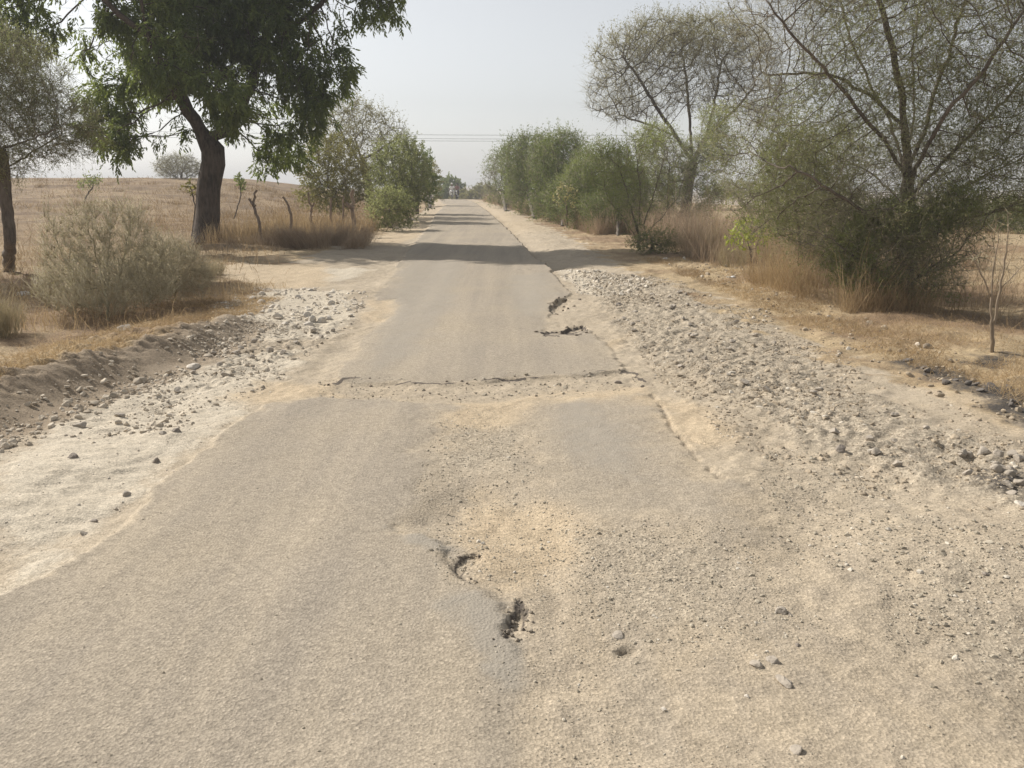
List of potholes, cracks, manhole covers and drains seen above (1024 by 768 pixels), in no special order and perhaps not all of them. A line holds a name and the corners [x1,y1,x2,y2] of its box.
pothole [538,325,591,337]
pothole [547,298,572,315]
